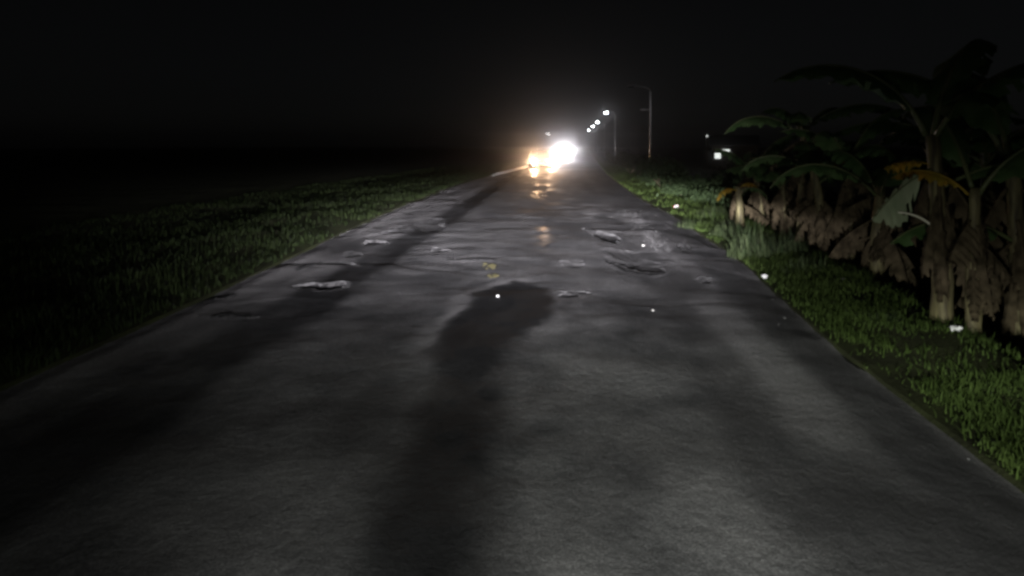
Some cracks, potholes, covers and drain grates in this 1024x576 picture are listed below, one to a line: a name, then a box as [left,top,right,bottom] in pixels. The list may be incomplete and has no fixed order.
pothole [551,289,596,299]
pothole [581,228,626,245]
pothole [286,280,352,292]
pothole [601,247,670,275]
pothole [555,259,590,269]
